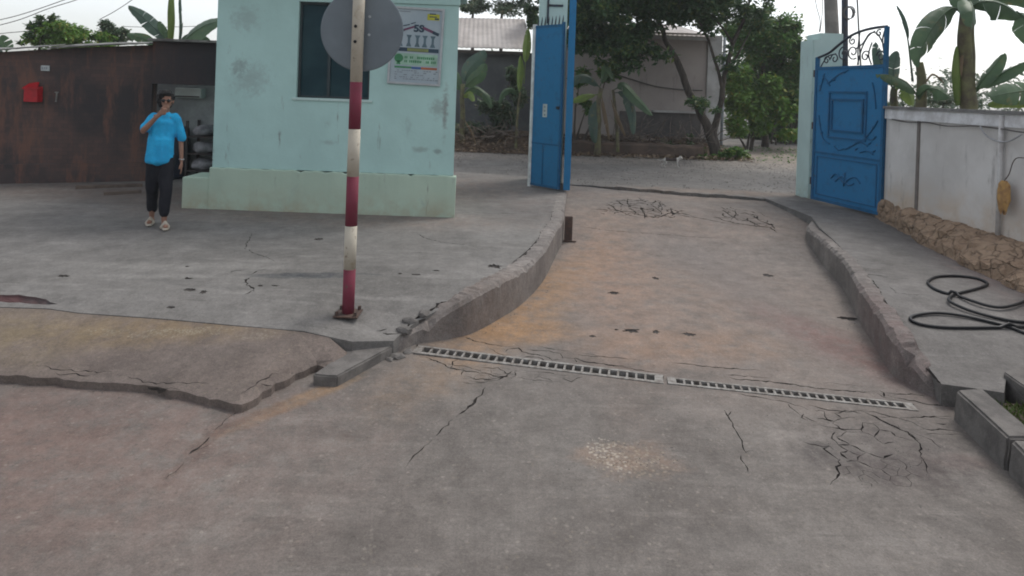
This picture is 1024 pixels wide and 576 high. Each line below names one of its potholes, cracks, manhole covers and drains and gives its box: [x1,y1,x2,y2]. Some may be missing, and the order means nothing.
crack [678,274,952,487]
crack [230,233,274,294]
crack [129,377,199,394]
crack [407,337,658,465]
drain grate [667,377,919,411]
crack [600,198,776,232]
drain grate [412,345,664,384]
